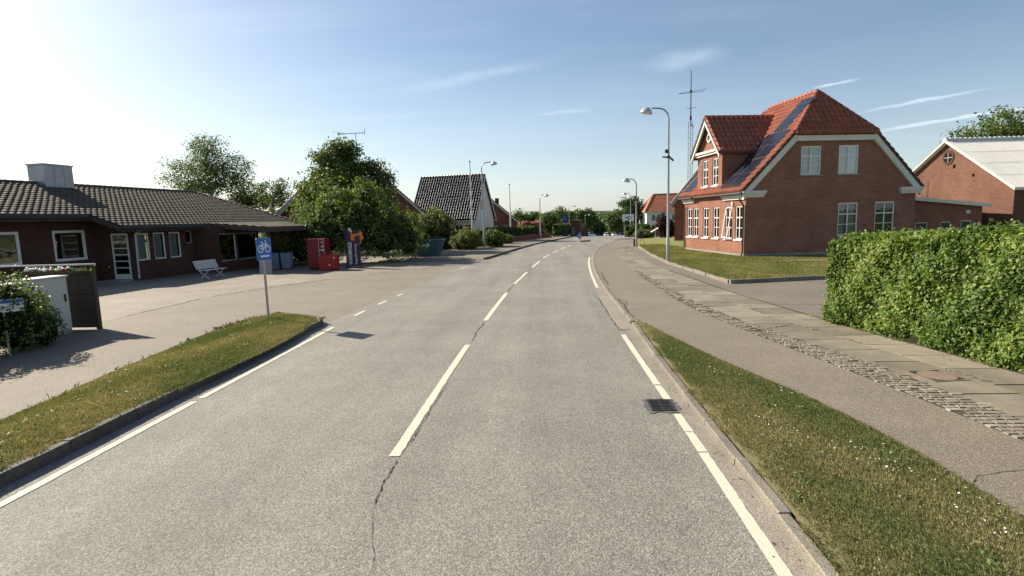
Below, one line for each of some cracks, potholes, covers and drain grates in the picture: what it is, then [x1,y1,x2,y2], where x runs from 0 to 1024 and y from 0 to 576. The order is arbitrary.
manhole cover [905,369,971,382]
drain grate [643,398,682,413]
